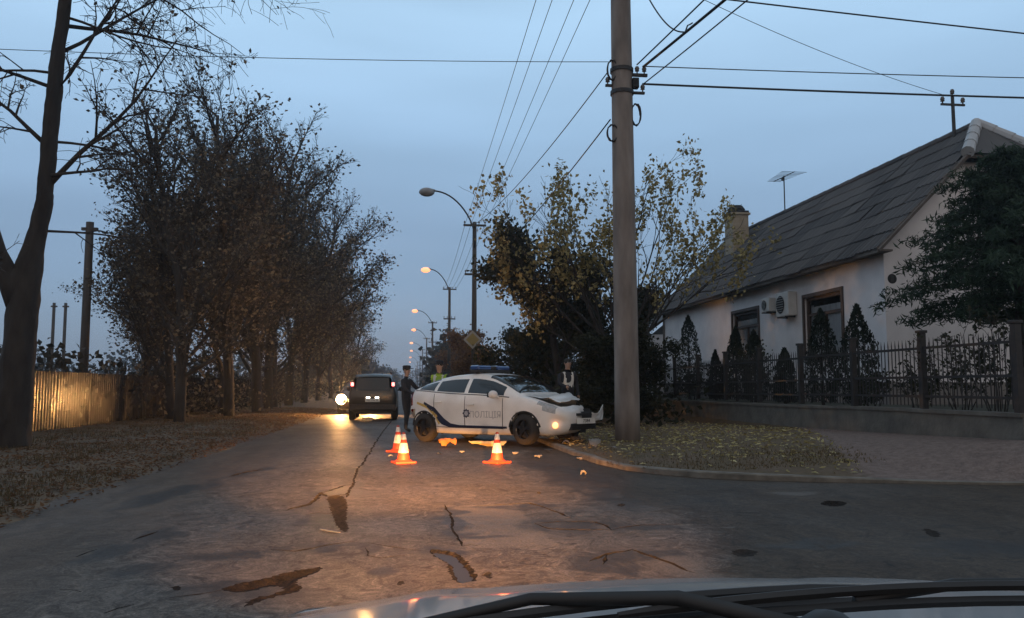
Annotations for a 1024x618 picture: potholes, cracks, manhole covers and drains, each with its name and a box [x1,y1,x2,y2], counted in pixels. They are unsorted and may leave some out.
crack [590,549,695,573]
pothole [430,549,478,583]
crack [445,505,477,546]
pothole [221,567,323,607]
pothole [326,495,349,532]
